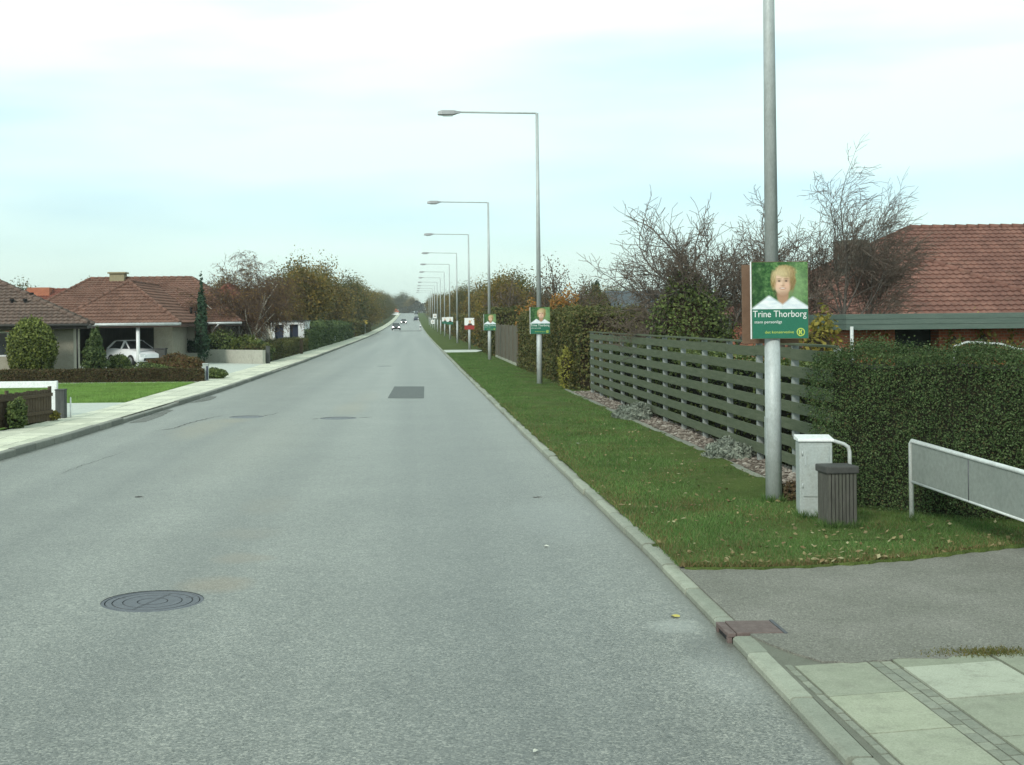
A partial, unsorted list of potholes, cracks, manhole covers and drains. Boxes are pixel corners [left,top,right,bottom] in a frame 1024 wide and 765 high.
drain grate [716,619,788,643]
manhole cover [100,591,204,612]
